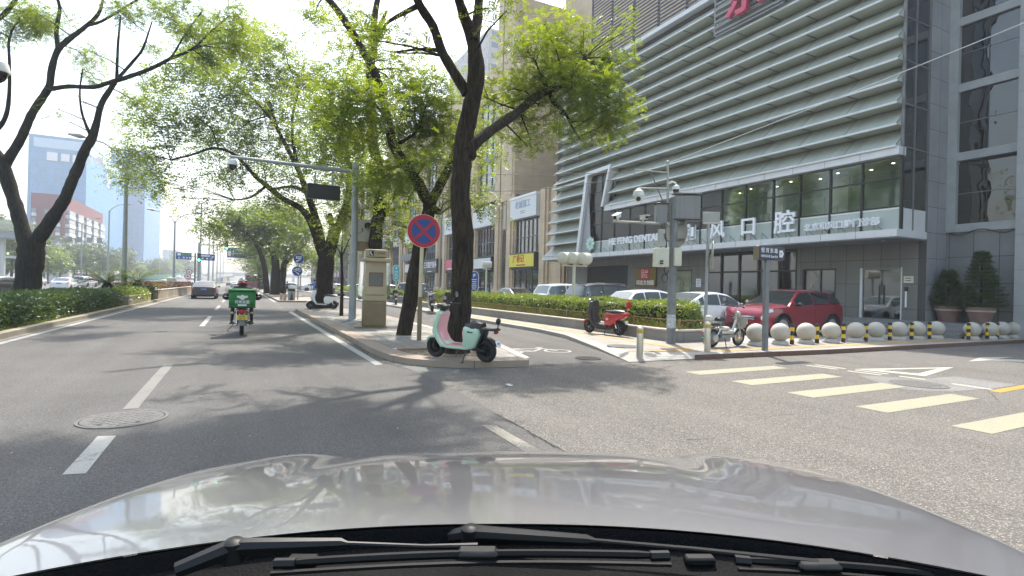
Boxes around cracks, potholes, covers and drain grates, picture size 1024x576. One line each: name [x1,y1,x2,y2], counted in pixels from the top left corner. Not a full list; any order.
manhole cover [73,409,169,429]
